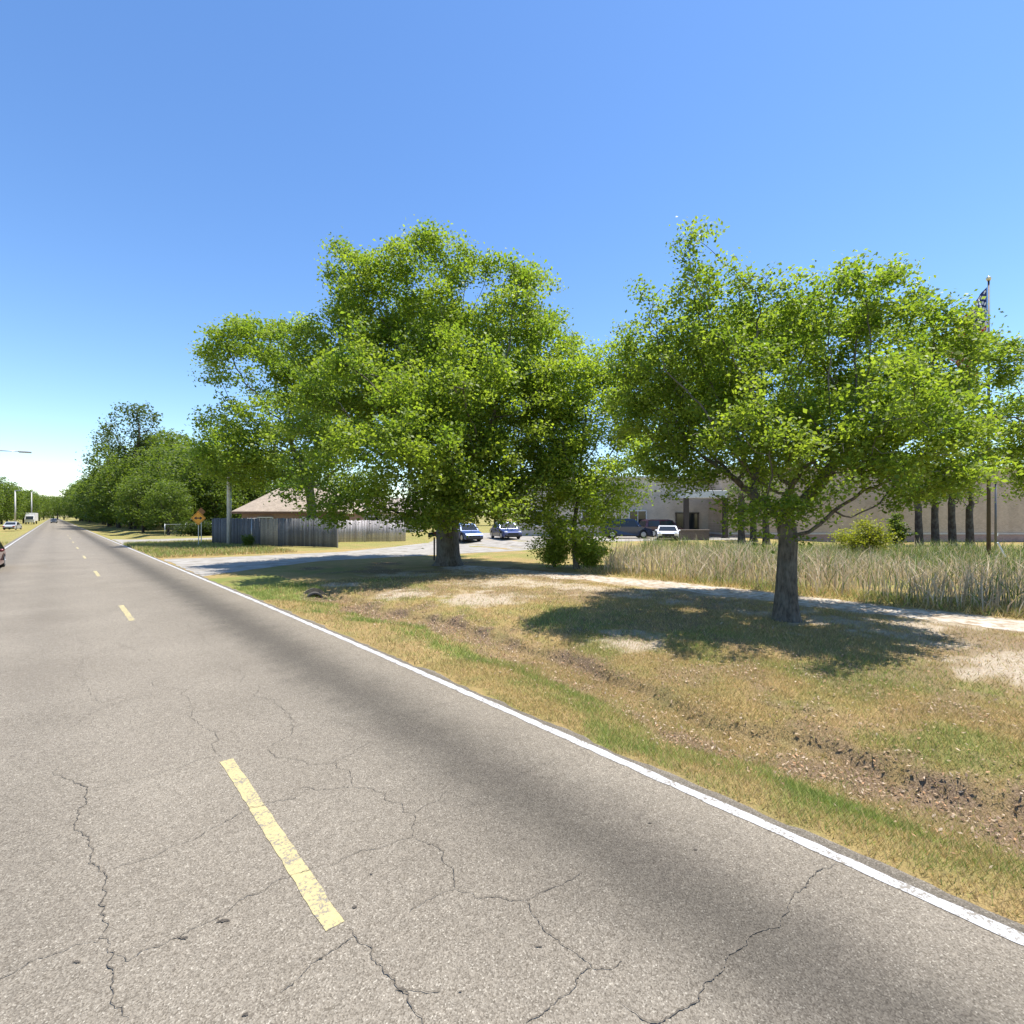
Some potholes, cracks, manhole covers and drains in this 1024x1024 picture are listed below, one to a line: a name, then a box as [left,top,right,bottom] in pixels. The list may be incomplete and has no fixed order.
crack [0,666,623,1024]
crack [620,862,838,1023]
